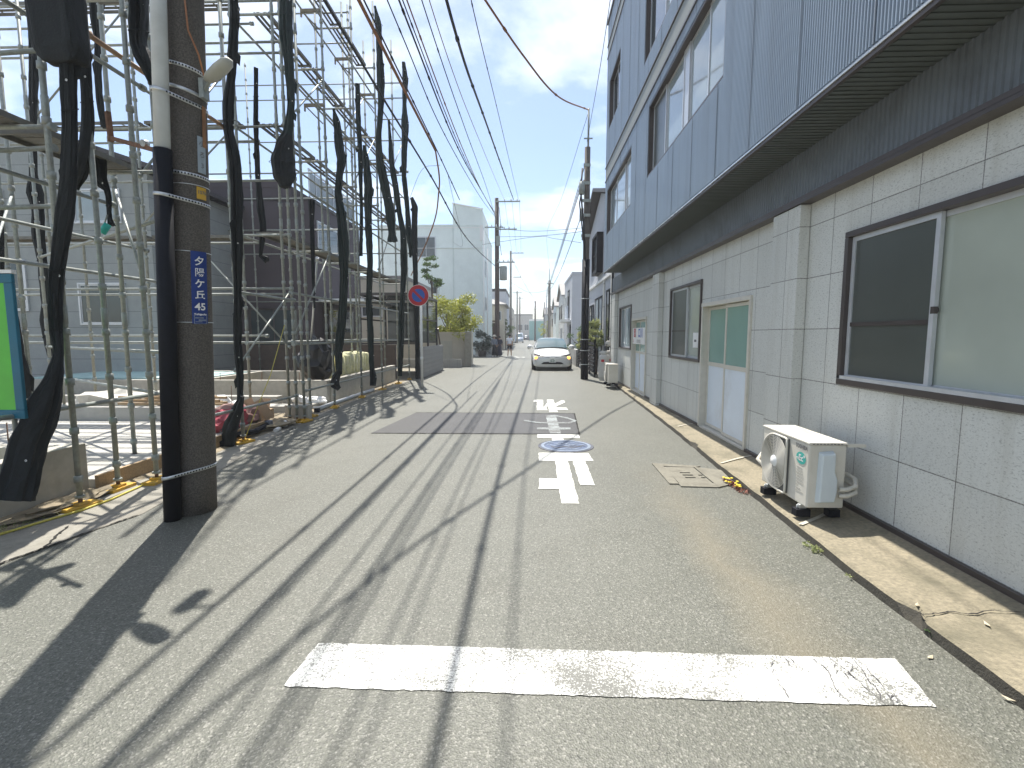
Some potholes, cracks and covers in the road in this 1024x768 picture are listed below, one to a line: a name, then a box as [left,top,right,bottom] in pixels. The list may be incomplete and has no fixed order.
crack [771,656,907,705]
crack [920,609,1018,617]
manhole cover [538,440,594,453]
